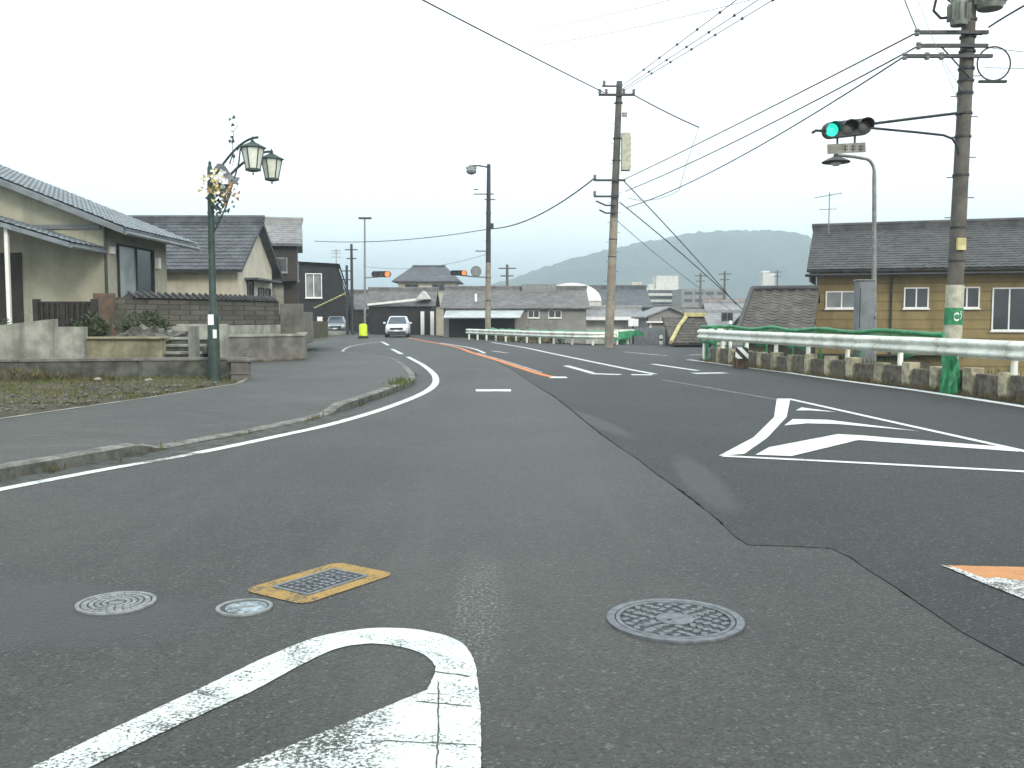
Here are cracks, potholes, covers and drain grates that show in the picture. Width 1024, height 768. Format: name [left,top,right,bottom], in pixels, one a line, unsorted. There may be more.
manhole cover [215,598,273,617]
manhole cover [607,598,745,644]
manhole cover [75,591,157,615]
crack [371,670,477,768]
